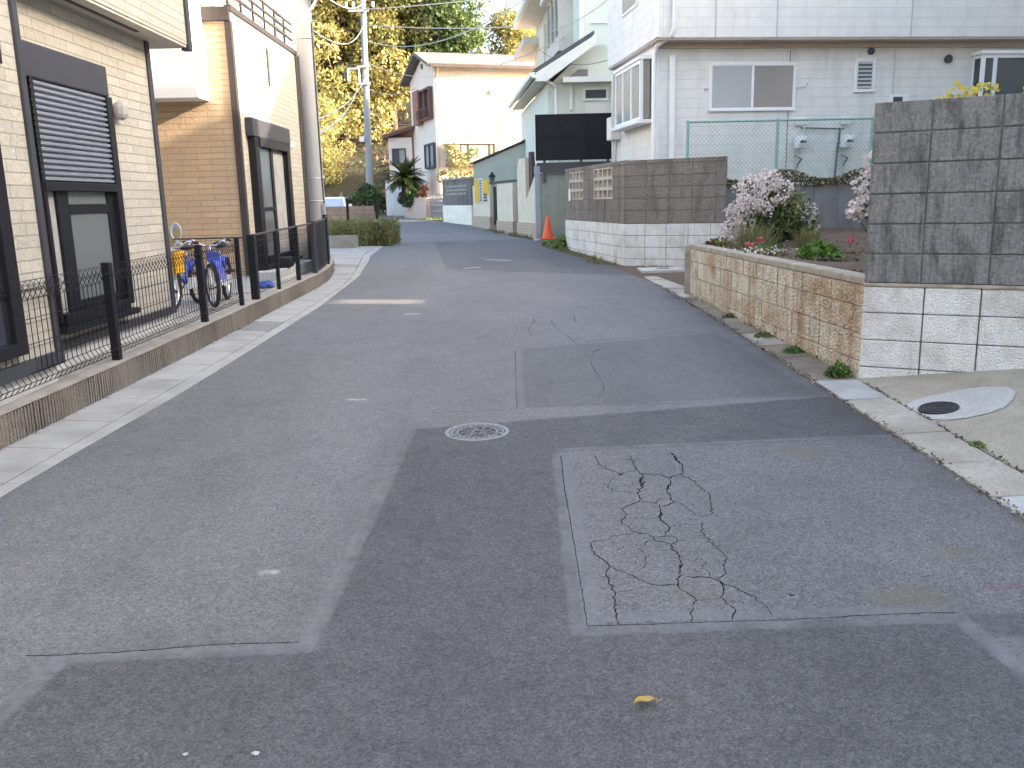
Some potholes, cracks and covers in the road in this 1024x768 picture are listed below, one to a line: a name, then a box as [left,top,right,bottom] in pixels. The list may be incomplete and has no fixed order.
crack [560,453,957,626]
manhole cover [445,423,509,441]
crack [432,319,694,413]
